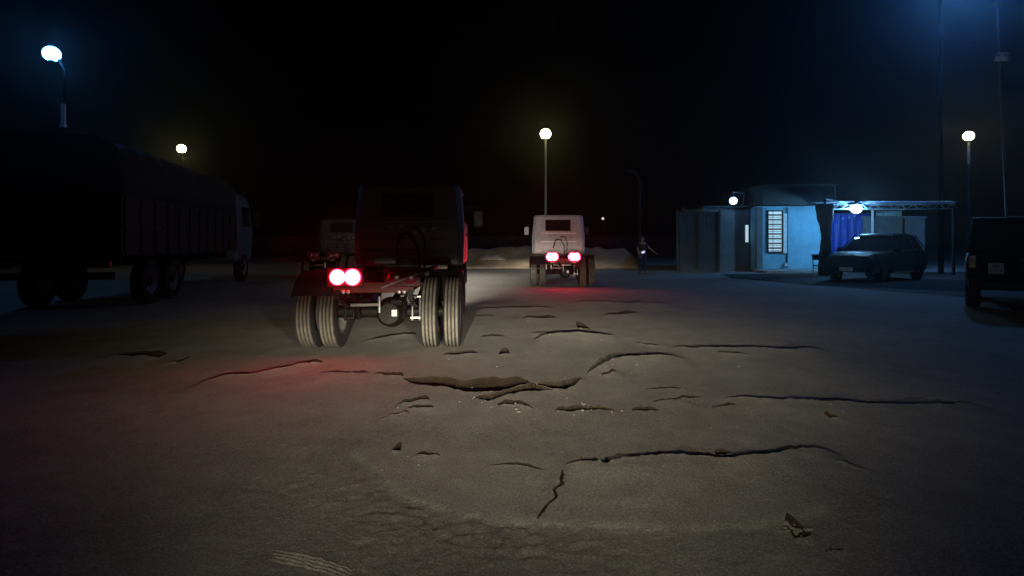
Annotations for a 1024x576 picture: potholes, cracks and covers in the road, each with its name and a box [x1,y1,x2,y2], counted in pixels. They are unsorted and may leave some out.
pothole [404,376,530,392]
crack [233,359,404,376]
pothole [785,513,811,538]
crack [475,300,971,407]
crack [385,395,434,417]
crack [492,444,816,519]
